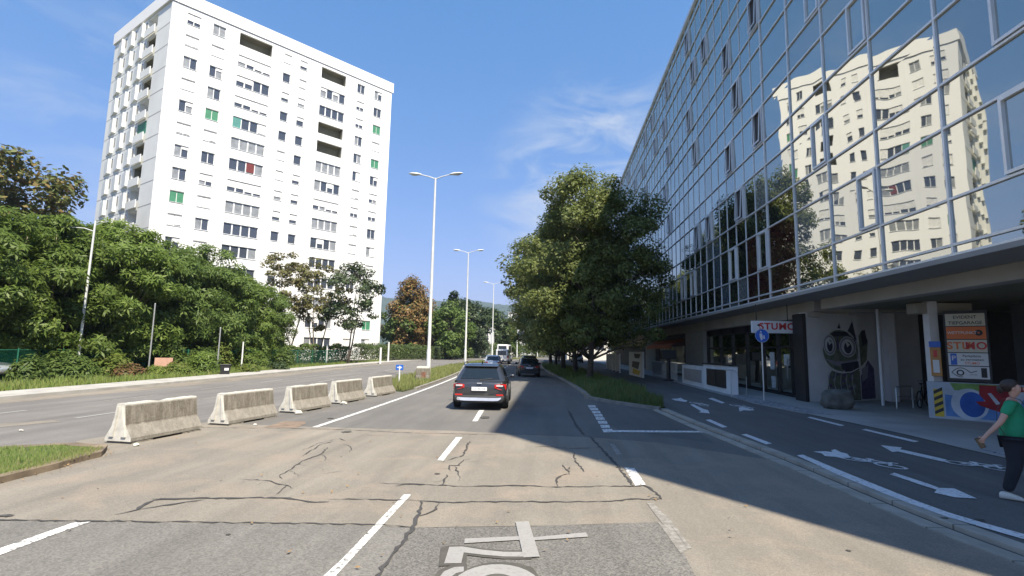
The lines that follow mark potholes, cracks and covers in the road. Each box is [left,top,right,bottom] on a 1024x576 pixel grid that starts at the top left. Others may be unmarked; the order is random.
crack [539,446,598,486]
crack [434,441,477,483]
crack [248,435,378,493]
